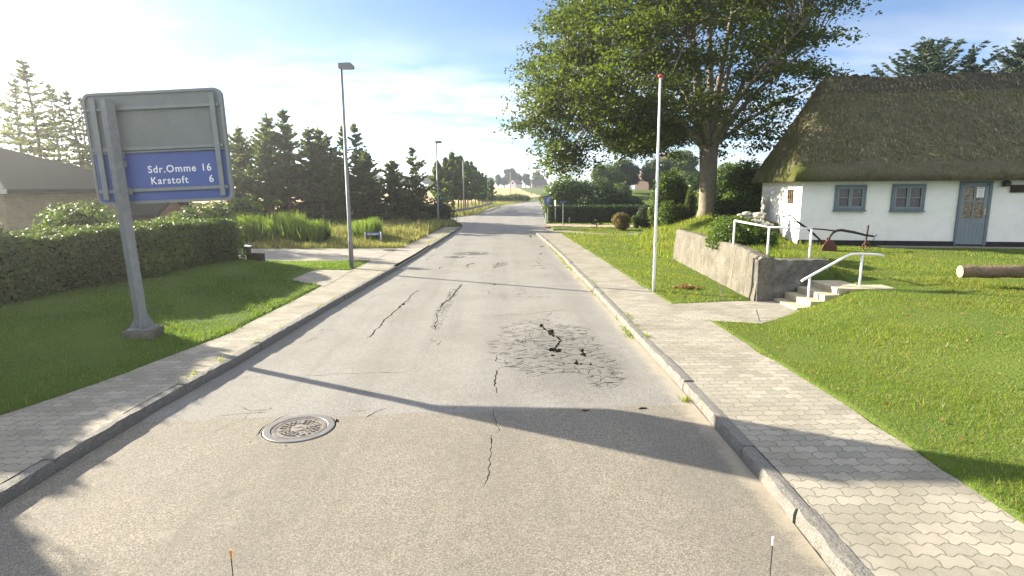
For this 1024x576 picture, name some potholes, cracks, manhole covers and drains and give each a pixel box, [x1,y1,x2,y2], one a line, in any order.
crack [367,291,417,338]
crack [484,411,500,485]
crack [488,309,625,393]
manhole cover [262,414,335,443]
crack [409,257,548,345]
